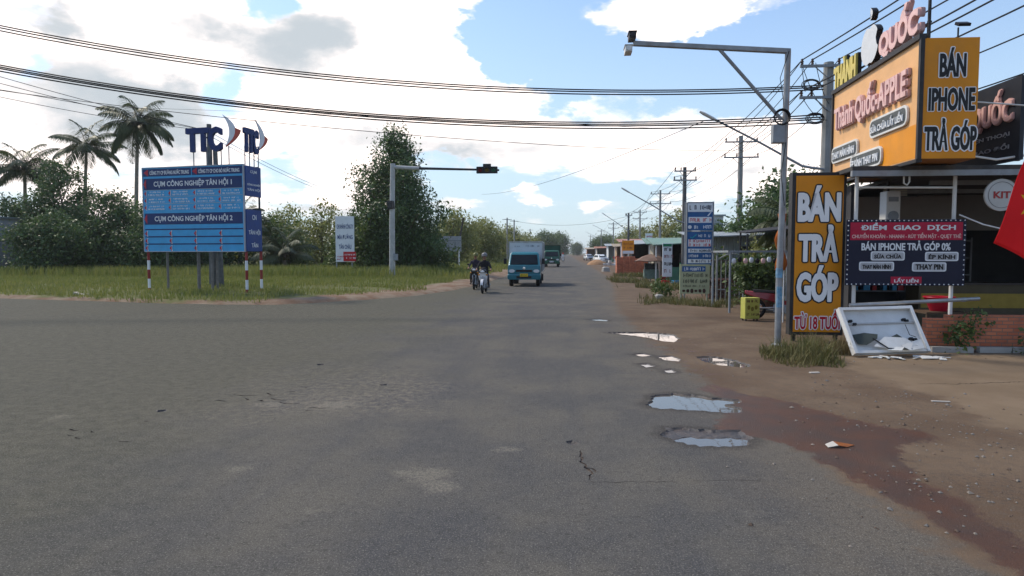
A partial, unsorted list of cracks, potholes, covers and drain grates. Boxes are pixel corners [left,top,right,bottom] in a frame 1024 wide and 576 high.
pothole [660,427,754,445]
pothole [645,393,743,412]
